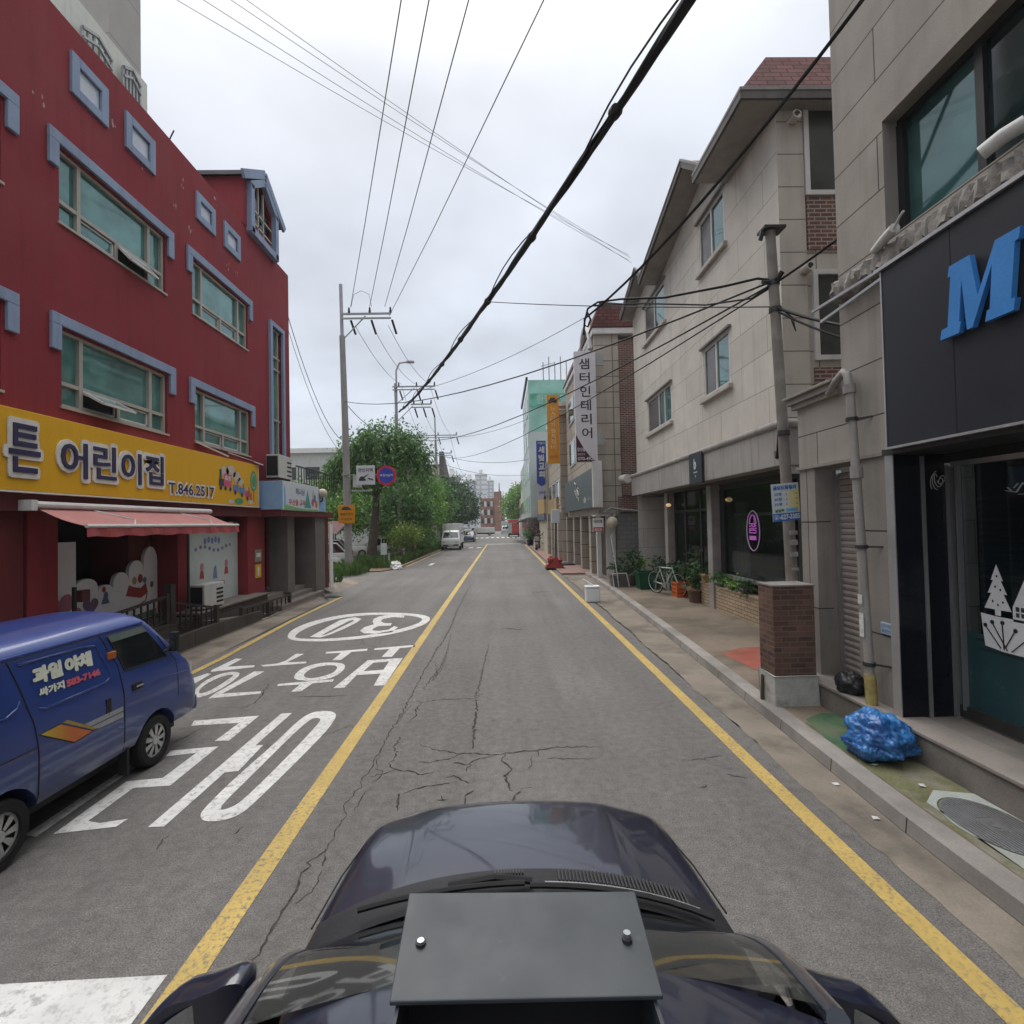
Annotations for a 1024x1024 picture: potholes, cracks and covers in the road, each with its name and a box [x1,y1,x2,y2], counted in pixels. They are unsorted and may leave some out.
crack [251,584,593,960]
manhole cover [927,790,1024,869]
